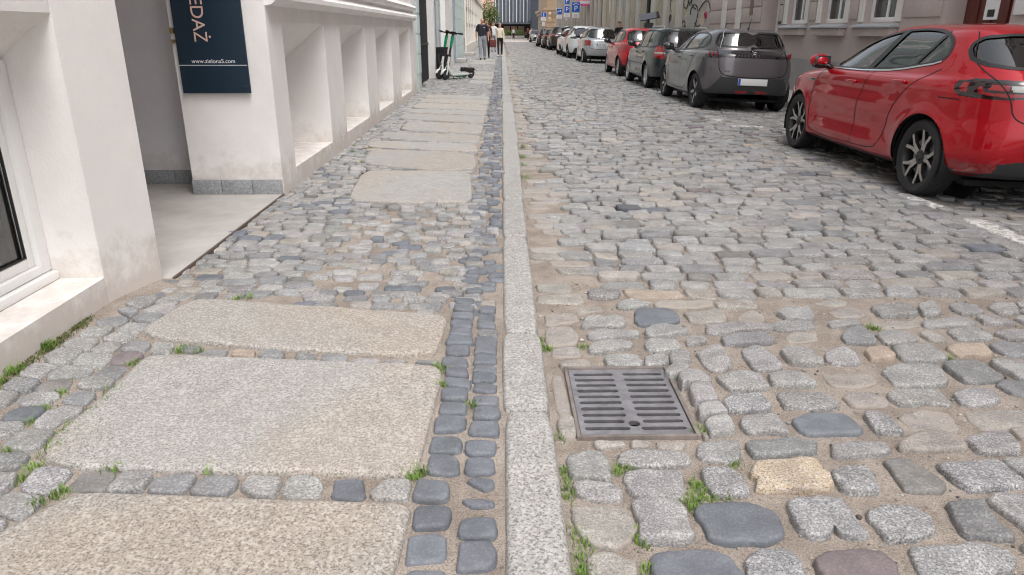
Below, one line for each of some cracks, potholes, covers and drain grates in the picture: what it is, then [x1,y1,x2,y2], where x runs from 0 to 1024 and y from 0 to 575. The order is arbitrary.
drain grate [564,366,701,441]
